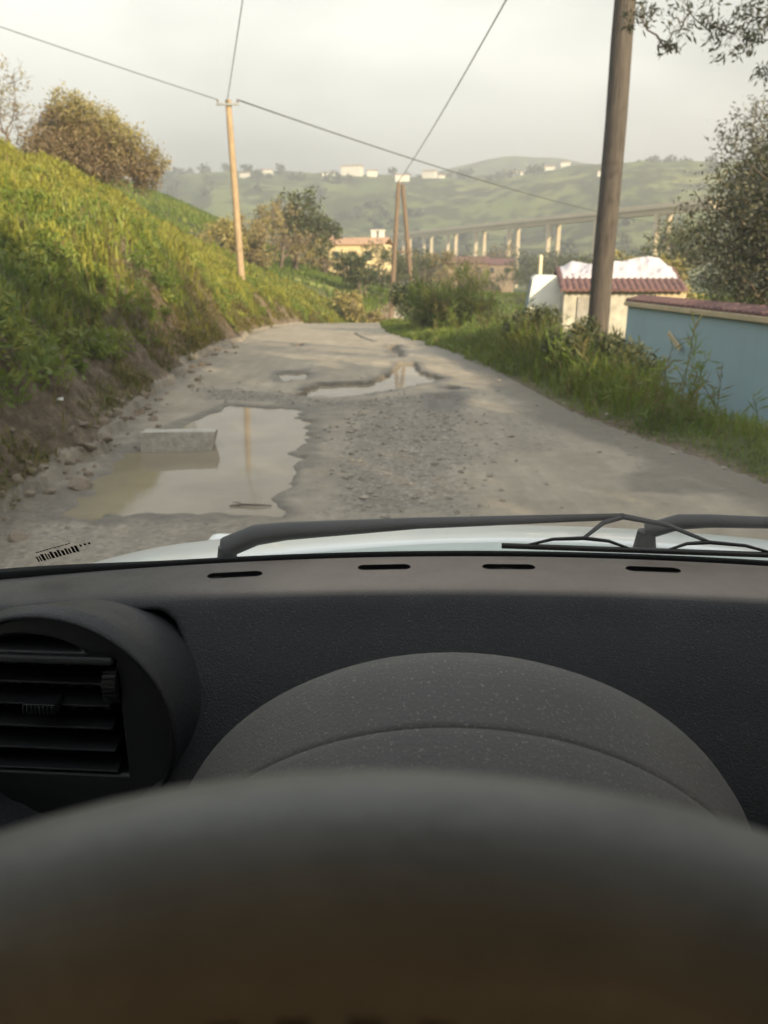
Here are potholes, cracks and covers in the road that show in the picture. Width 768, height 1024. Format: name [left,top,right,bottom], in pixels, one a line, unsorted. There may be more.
pothole [45,403,320,522]
pothole [299,363,447,396]
pothole [386,344,405,357]
